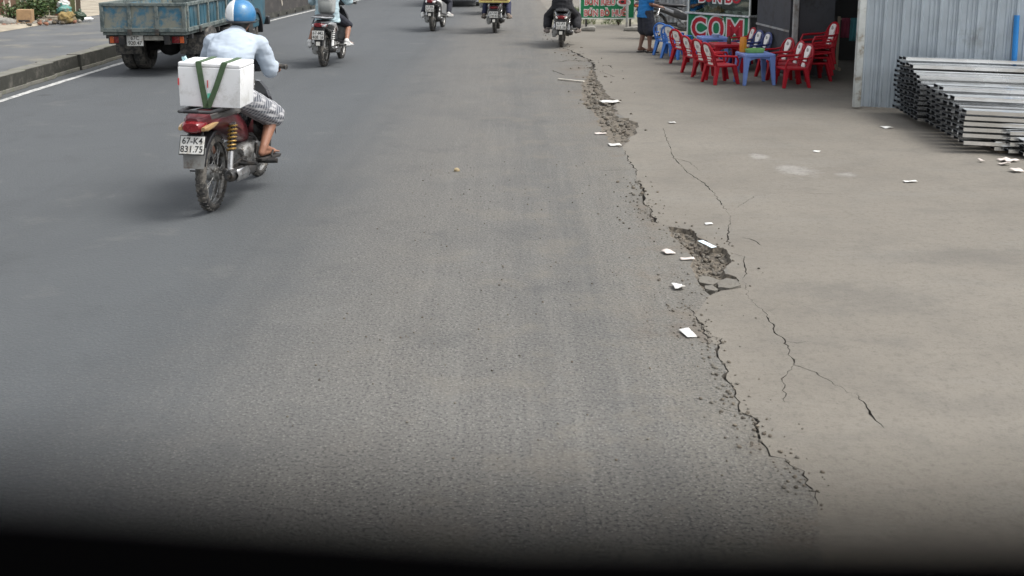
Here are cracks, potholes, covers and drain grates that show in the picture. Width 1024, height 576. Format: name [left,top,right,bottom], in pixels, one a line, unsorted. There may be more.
pothole [669,227,739,289]
pothole [581,70,639,147]
crack [663,129,884,428]
